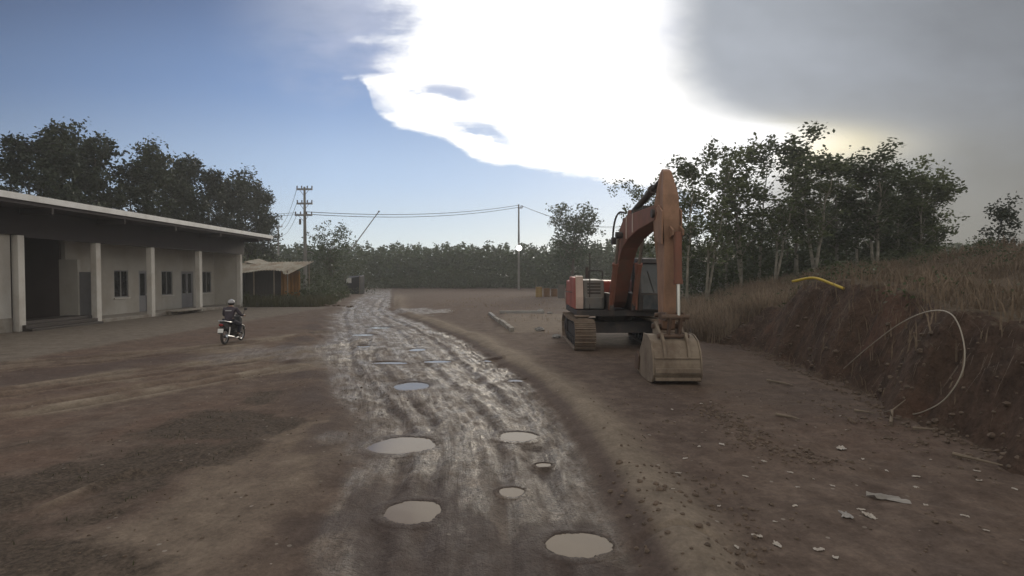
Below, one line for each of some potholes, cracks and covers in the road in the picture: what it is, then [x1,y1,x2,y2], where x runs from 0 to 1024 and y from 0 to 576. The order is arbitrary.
pothole [493,485,531,500]
pothole [531,462,555,471]
pothole [369,496,454,530]
pothole [385,380,437,393]
pothole [491,430,548,445]
pothole [348,434,452,459]
pothole [530,528,630,565]
